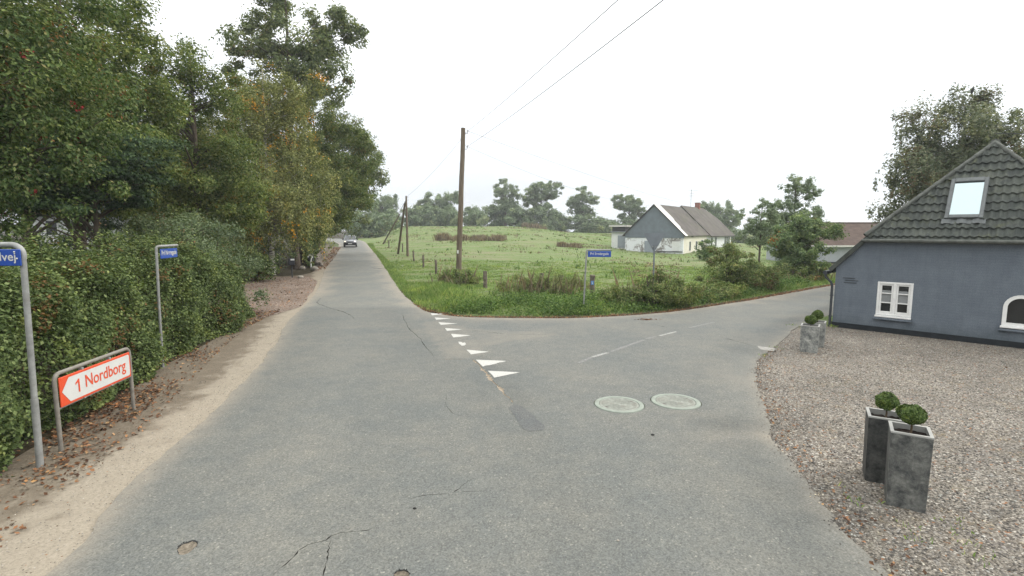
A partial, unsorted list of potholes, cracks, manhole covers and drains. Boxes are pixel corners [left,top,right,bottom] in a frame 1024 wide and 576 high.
crack [279,529,371,575]
manhole cover [651,394,701,410]
pothole [177,540,198,555]
manhole cover [594,396,644,413]
